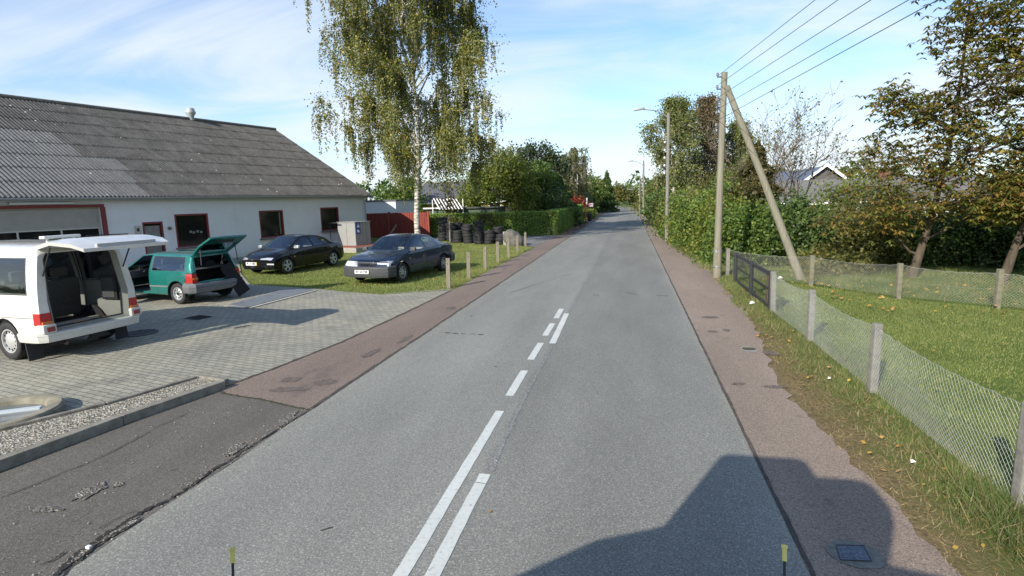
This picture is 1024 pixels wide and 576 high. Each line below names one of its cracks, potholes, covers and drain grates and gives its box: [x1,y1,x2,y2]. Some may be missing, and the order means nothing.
crack [1,413,186,497]
pothole [68,481,107,502]
manhole cover [825,539,887,569]
crack [41,410,309,576]
